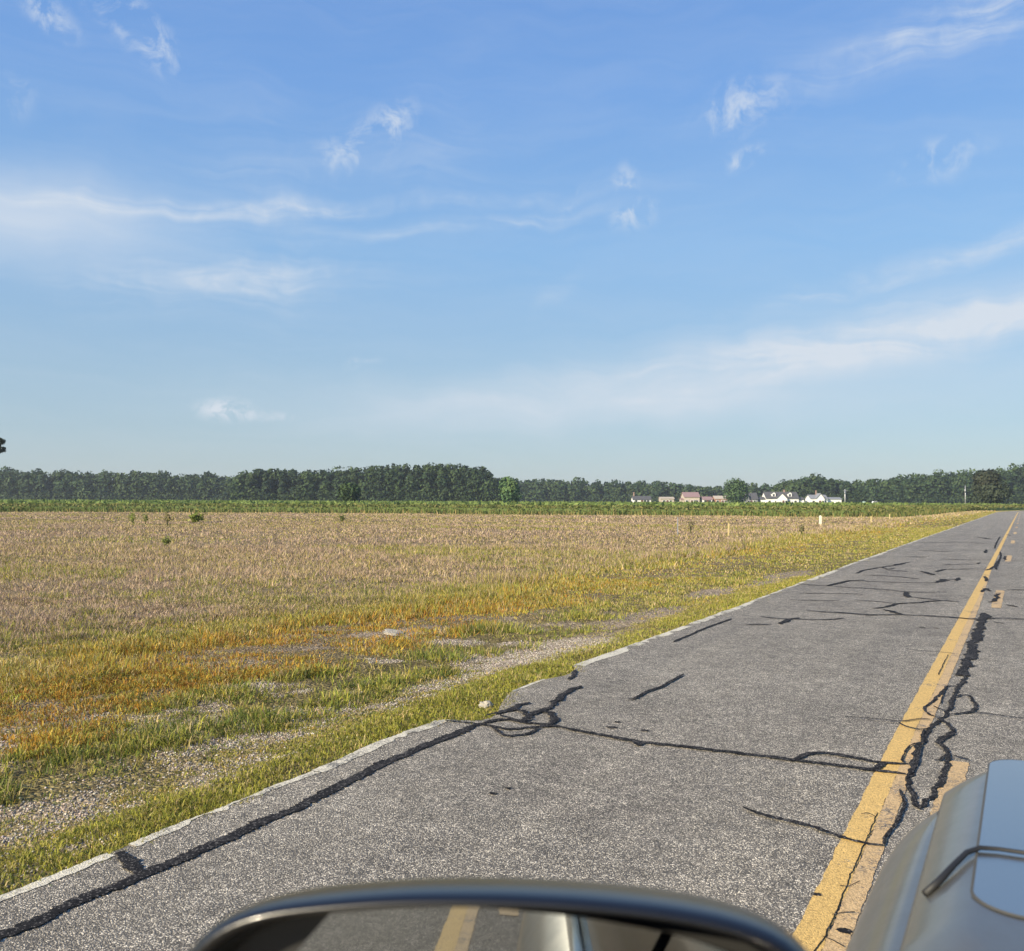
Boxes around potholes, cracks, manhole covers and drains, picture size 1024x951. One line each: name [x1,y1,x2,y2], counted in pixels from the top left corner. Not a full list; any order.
crack [760,537,1020,625]
crack [813,812,878,951]
